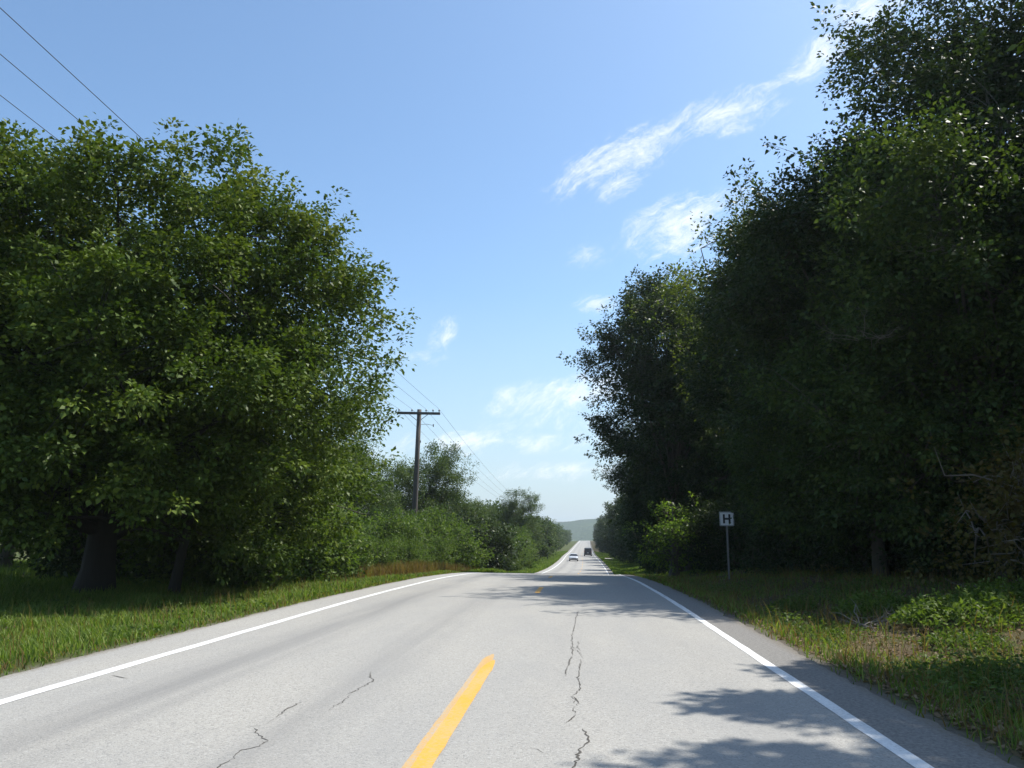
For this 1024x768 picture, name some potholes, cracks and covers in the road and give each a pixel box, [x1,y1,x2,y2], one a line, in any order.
crack [217,703,297,768]
crack [565,611,590,768]
